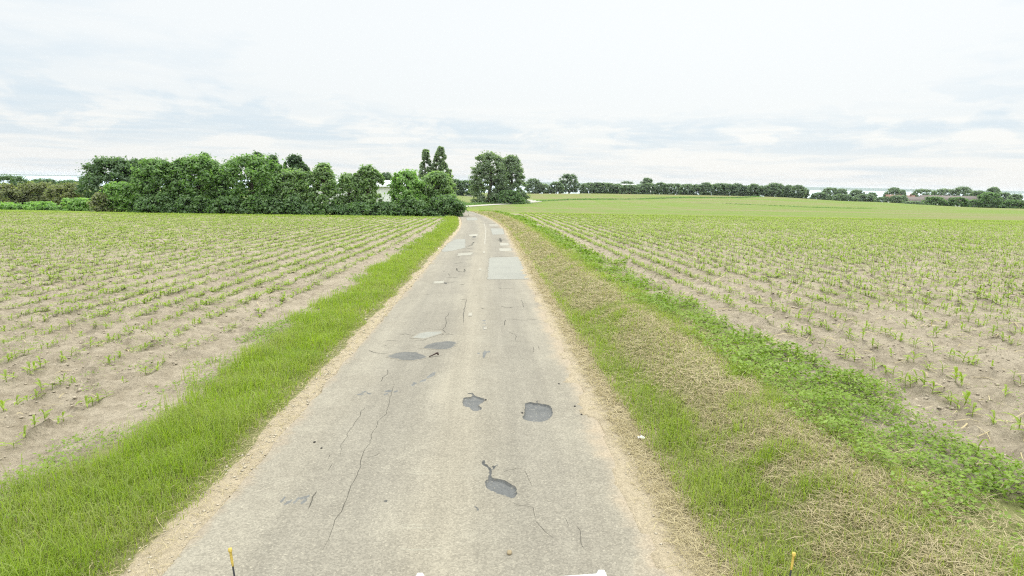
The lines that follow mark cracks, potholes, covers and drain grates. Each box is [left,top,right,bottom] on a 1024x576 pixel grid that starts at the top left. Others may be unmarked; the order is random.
crack [369,242,483,353]
crack [318,370,394,556]
